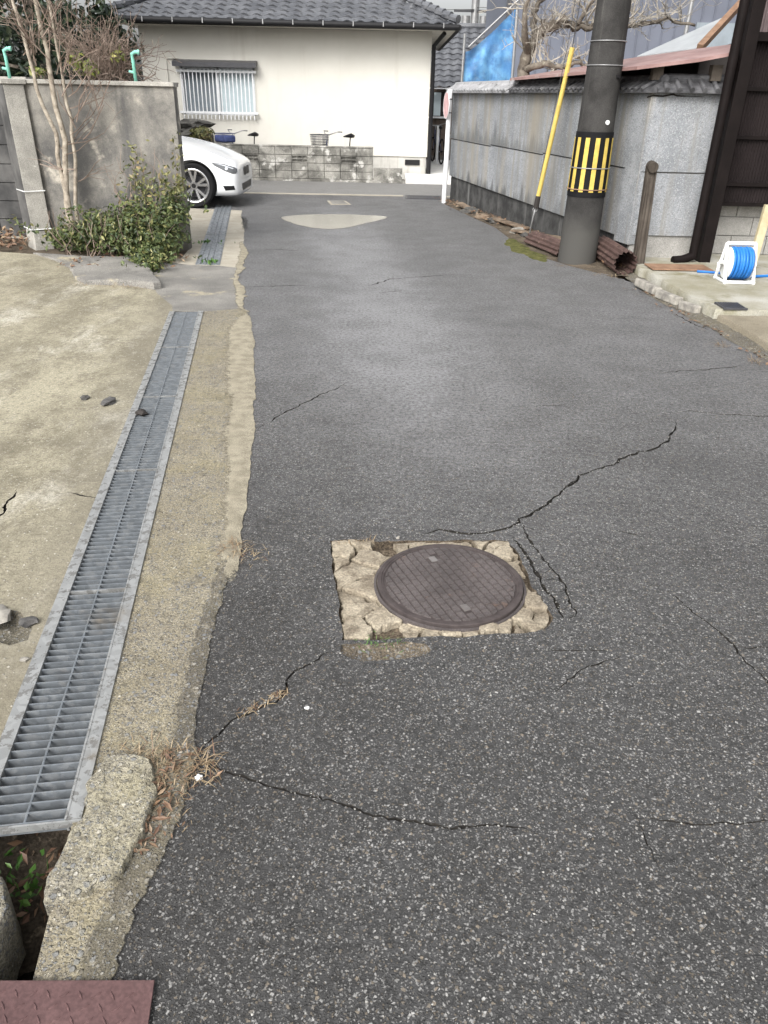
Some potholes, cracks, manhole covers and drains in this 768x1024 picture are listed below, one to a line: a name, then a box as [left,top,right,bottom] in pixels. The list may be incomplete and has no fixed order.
drain grate [58,468,166,595]
crack [669,592,768,683]
crack [0,489,17,516]
drain grate [136,346,195,398]
crack [258,385,342,429]
drain grate [156,311,204,348]
crack [635,811,768,867]
drain grate [0,588,137,837]
drain grate [107,395,183,472]
manhole cover [374,544,526,632]
crack [425,410,768,623]
crack [201,650,524,830]
